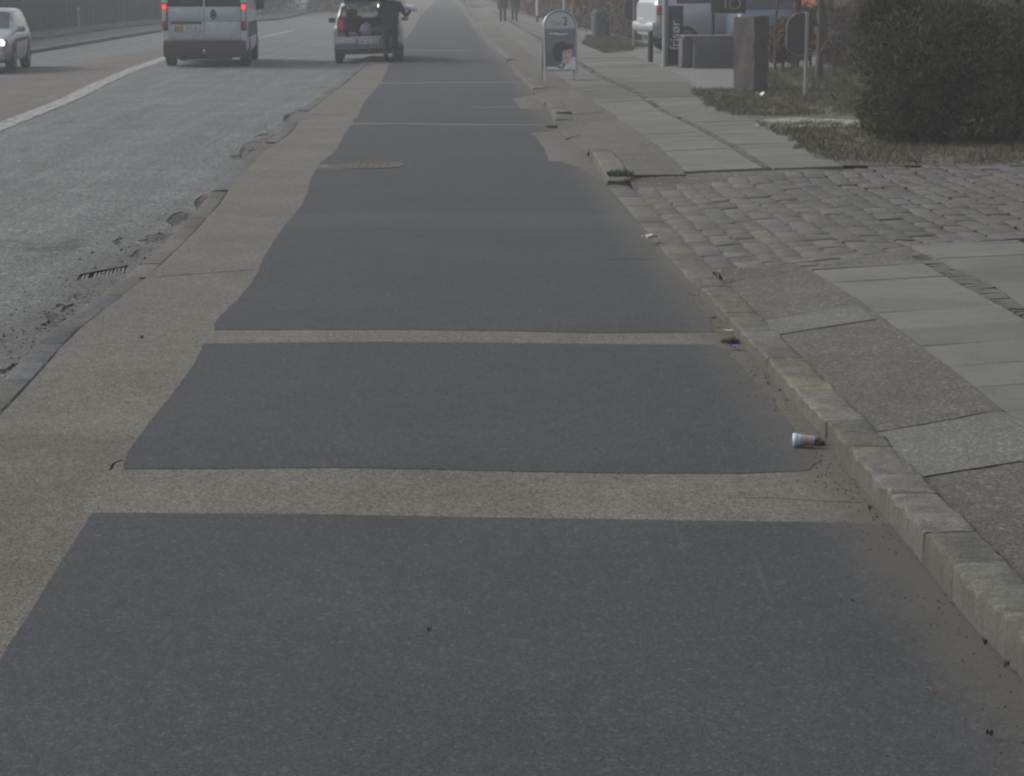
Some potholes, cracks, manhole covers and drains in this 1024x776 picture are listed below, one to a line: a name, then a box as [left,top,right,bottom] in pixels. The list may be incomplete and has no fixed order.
pothole [137,233,172,244]
manhole cover [327,161,406,169]
pothole [129,249,149,258]
pothole [229,134,277,161]
pothole [194,194,209,207]
drain grate [77,265,128,280]
pothole [167,210,193,226]
